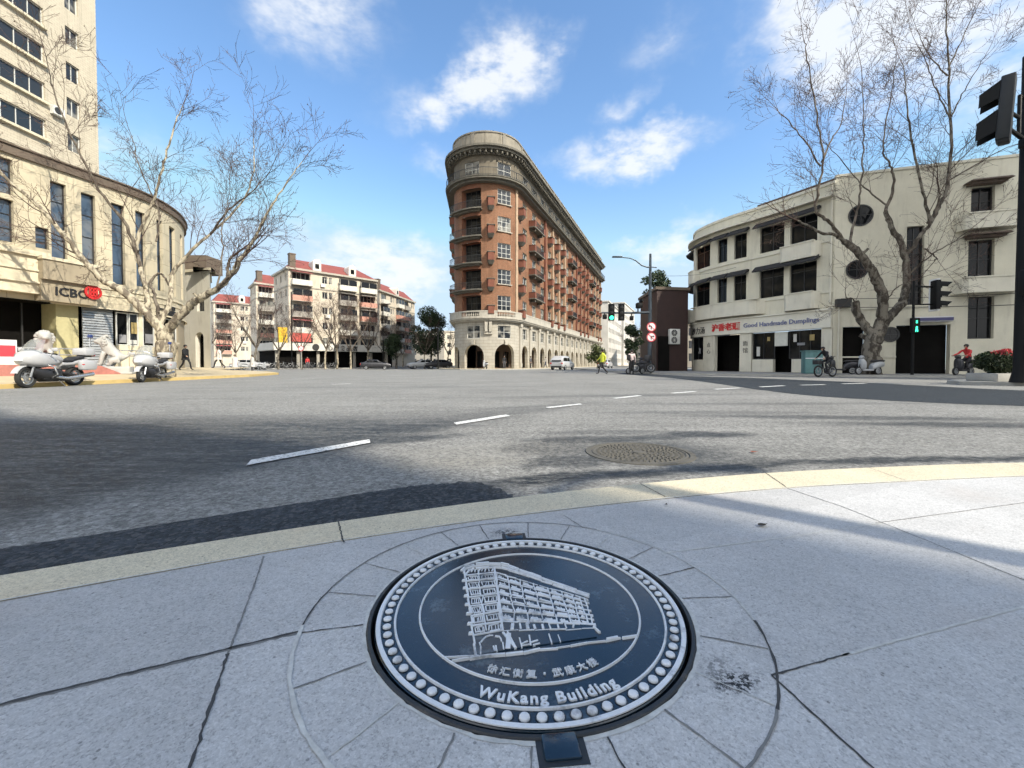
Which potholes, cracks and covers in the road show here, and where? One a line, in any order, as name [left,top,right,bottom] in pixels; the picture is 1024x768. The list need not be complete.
manhole cover [586,442,696,466]
manhole cover [366,533,696,768]
